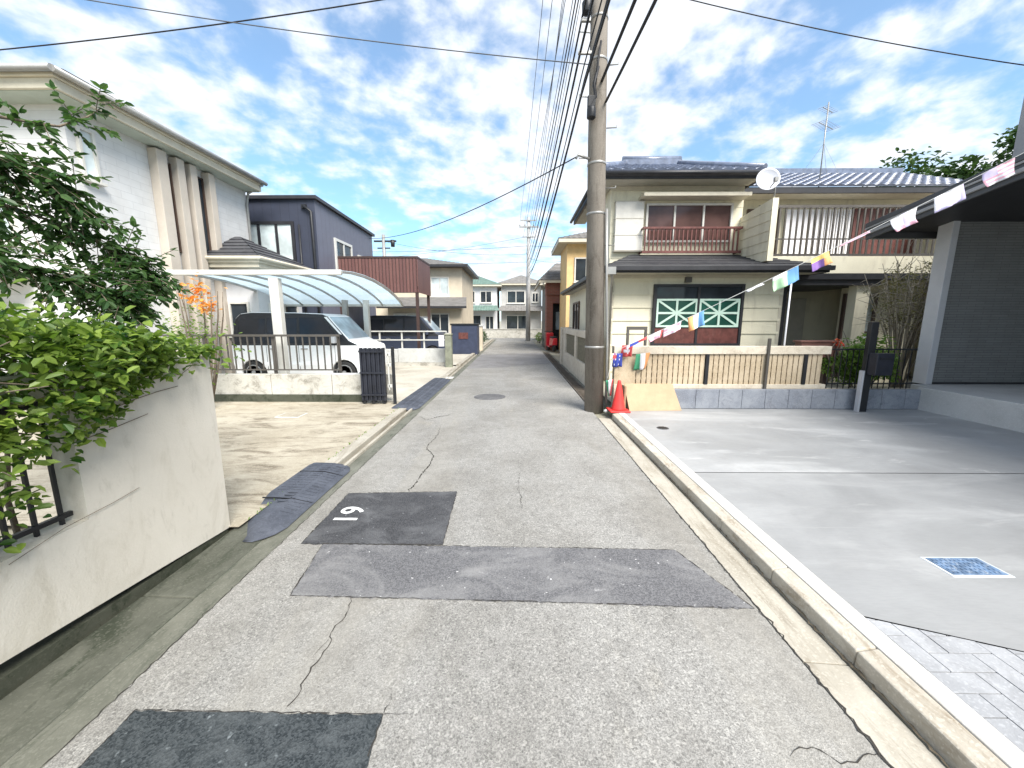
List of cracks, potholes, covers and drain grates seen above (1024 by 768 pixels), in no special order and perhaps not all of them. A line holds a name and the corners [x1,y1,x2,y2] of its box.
crack [40,419,412,768]
crack [408,414,450,490]
